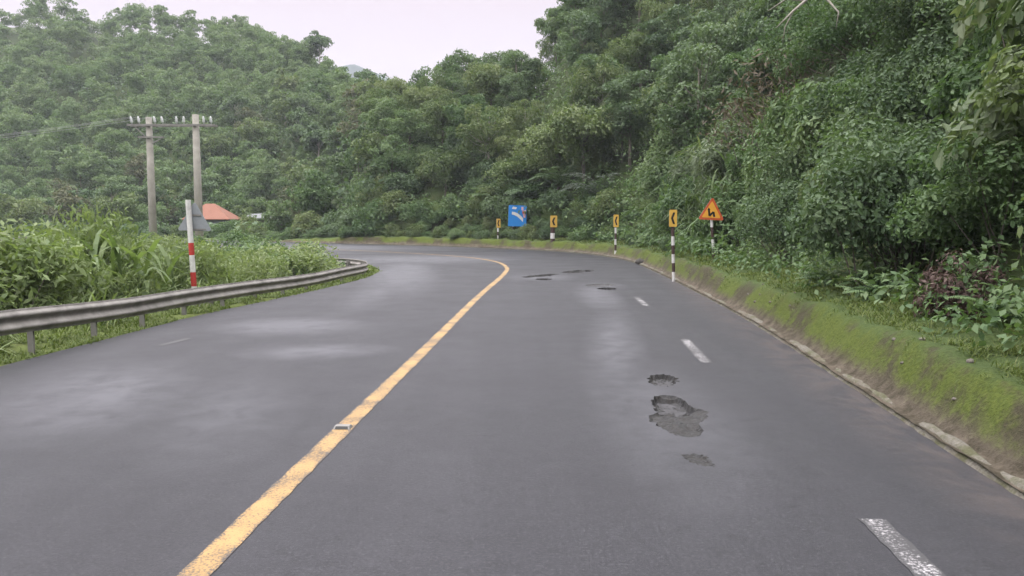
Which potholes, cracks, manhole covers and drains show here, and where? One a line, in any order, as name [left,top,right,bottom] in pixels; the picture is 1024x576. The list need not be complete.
pothole [647,374,680,387]
pothole [649,395,709,437]
pothole [682,453,716,467]
